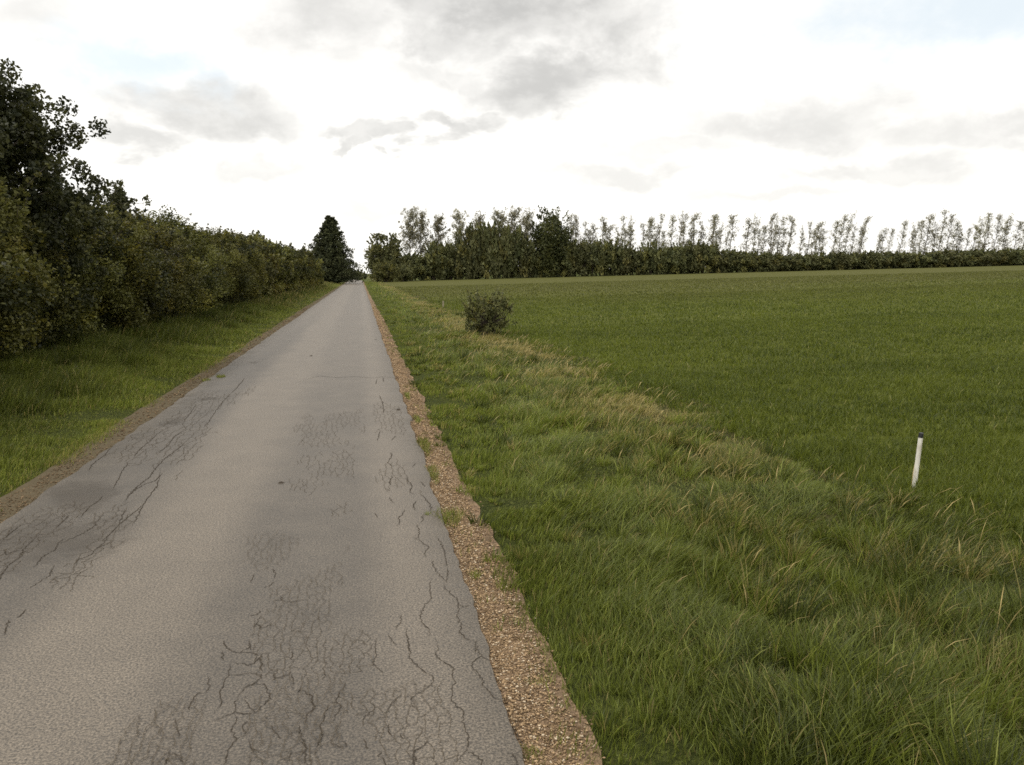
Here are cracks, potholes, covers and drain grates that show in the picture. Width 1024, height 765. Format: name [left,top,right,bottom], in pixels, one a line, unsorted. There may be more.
crack [0,380,253,591]
crack [106,376,507,765]
